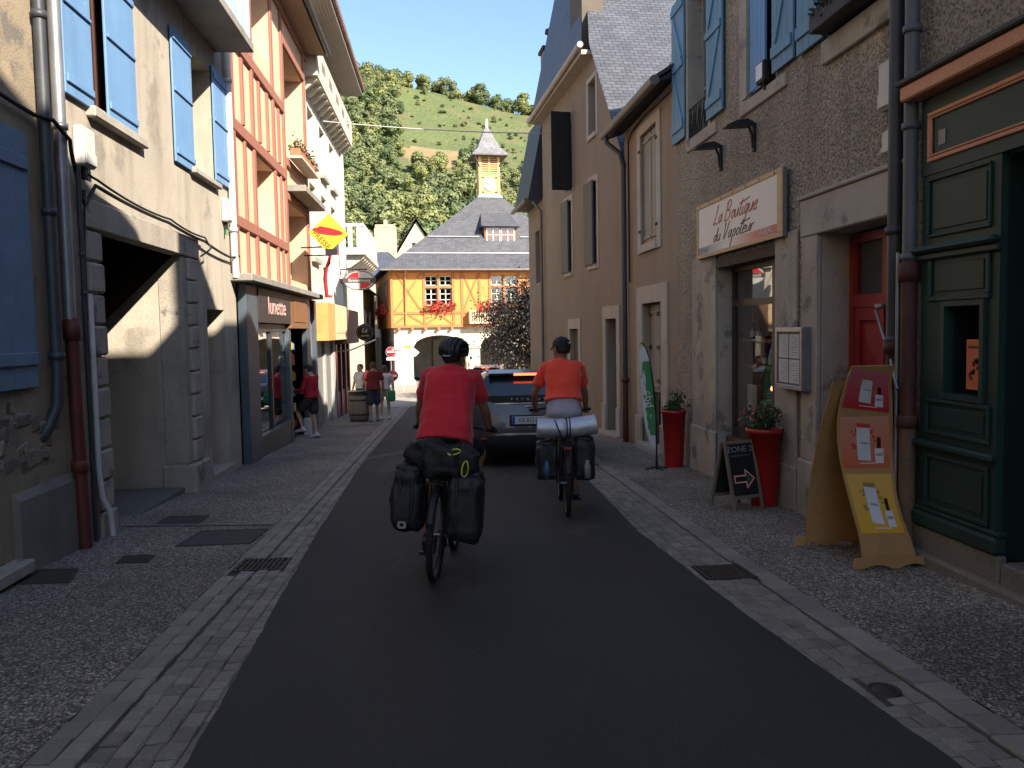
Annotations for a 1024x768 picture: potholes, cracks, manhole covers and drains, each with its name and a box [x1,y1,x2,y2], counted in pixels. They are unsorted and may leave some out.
drain grate [692,564,758,581]
manhole cover [12,568,79,585]
manhole cover [155,515,210,524]
manhole cover [116,554,155,564]
drain grate [231,557,292,573]
manhole cover [866,682,902,699]
manhole cover [175,528,268,547]
